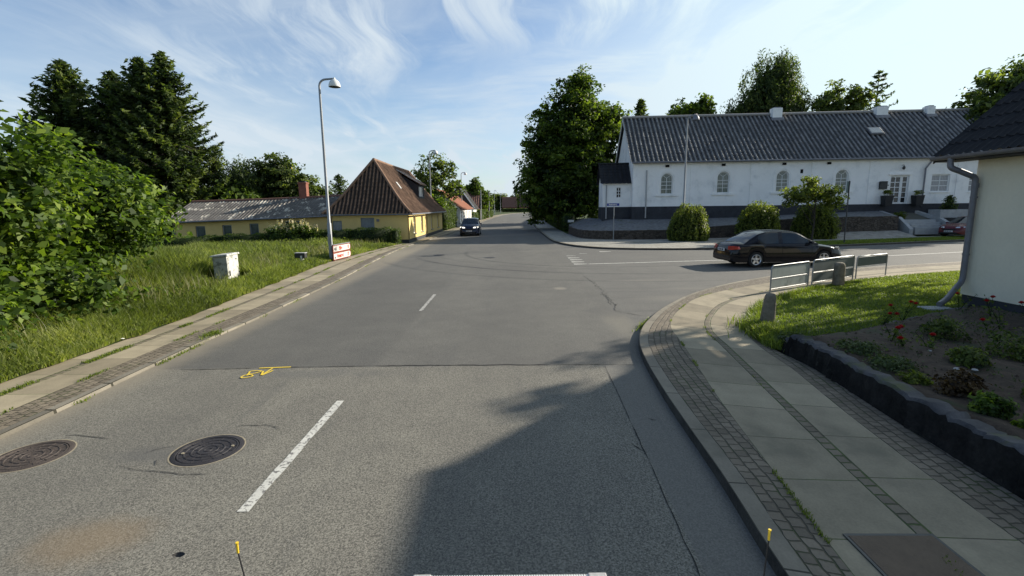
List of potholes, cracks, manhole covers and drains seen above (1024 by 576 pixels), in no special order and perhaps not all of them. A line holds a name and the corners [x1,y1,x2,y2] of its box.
manhole cover [0,439,78,474]
utility cover [842,533,985,576]
manhole cover [167,434,246,467]
